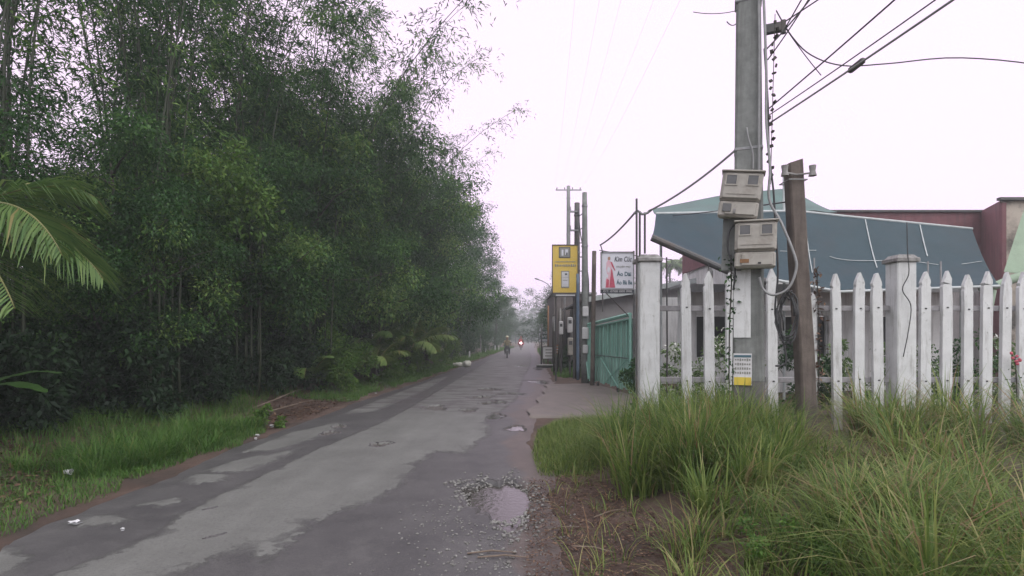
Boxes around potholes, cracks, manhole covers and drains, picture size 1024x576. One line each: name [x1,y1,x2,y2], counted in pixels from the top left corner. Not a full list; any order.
pothole [443,467,549,550]
pothole [485,412,508,420]
pothole [502,424,527,432]
